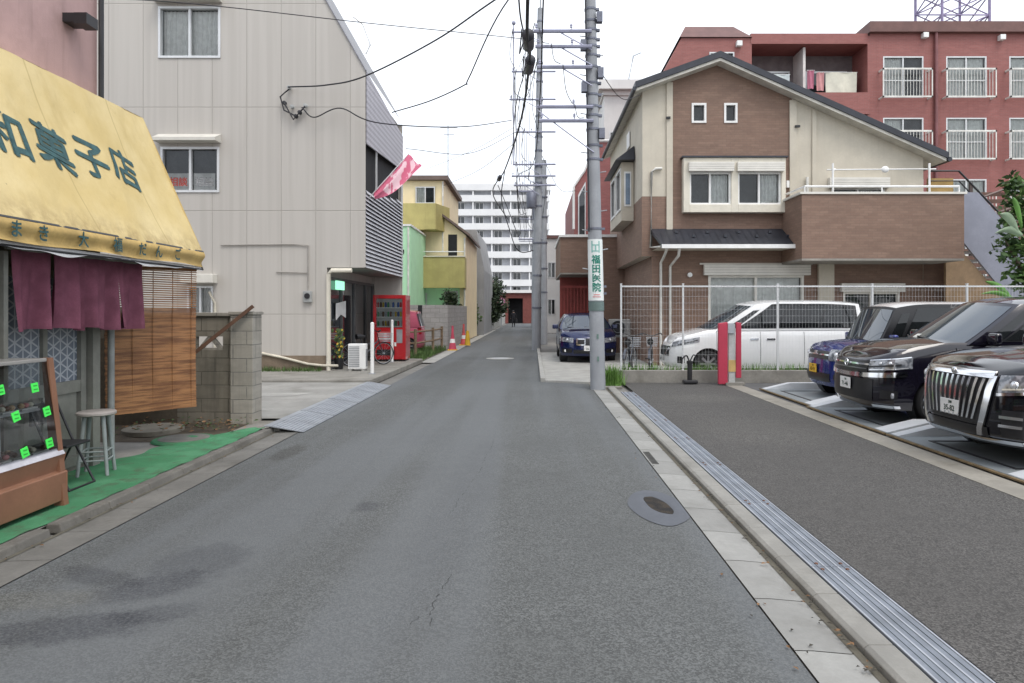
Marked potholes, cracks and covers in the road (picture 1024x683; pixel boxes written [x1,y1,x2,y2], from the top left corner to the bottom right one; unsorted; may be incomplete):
manhole cover [121,423,185,437]
manhole cover [628,490,690,526]
